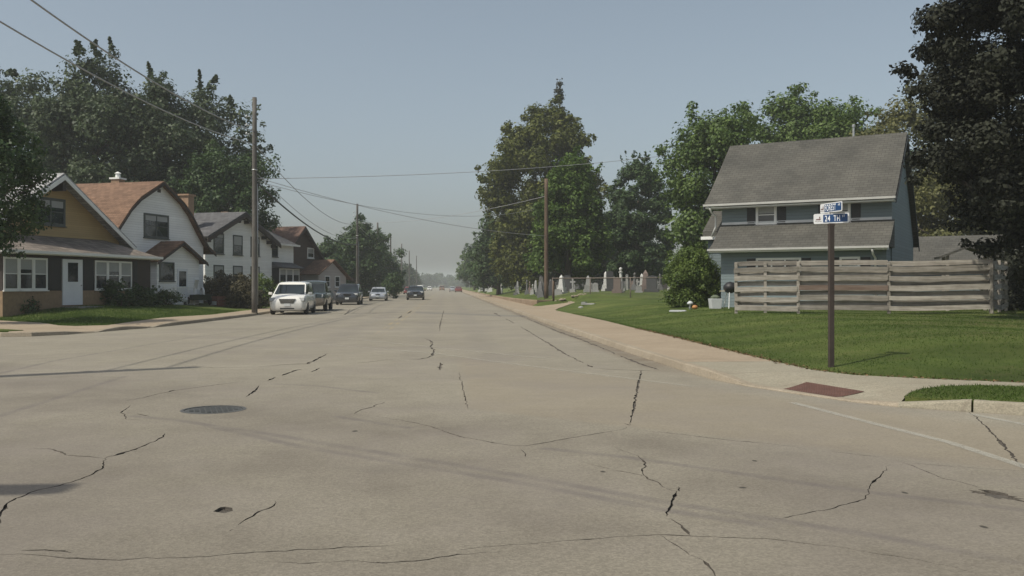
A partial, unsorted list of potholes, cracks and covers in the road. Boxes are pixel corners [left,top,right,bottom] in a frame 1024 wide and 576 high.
crack [362,338,443,370]
manhole cover [180,405,246,414]
crack [970,413,1024,469]
crack [5,418,986,576]
crack [120,354,326,420]
